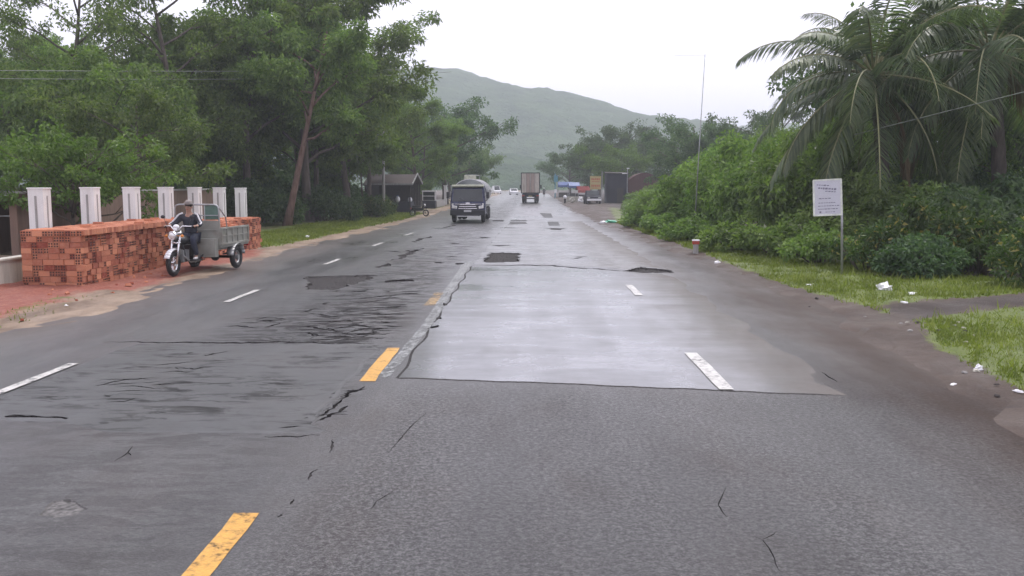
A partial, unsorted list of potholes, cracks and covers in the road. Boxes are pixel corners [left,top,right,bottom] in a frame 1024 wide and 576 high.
crack [371,414,425,509]
pothole [303,275,377,290]
pothole [484,252,521,263]
crack [98,289,418,402]
crack [718,488,779,570]
crack [264,386,365,437]
